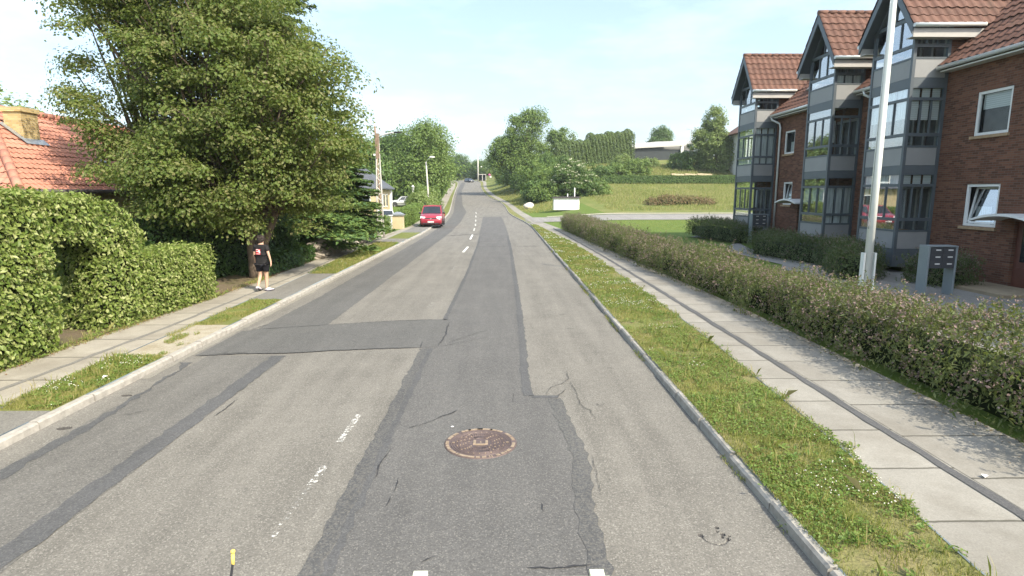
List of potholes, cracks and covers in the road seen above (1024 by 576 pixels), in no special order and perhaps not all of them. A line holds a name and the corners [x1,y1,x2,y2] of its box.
manhole cover [444,428,517,459]
